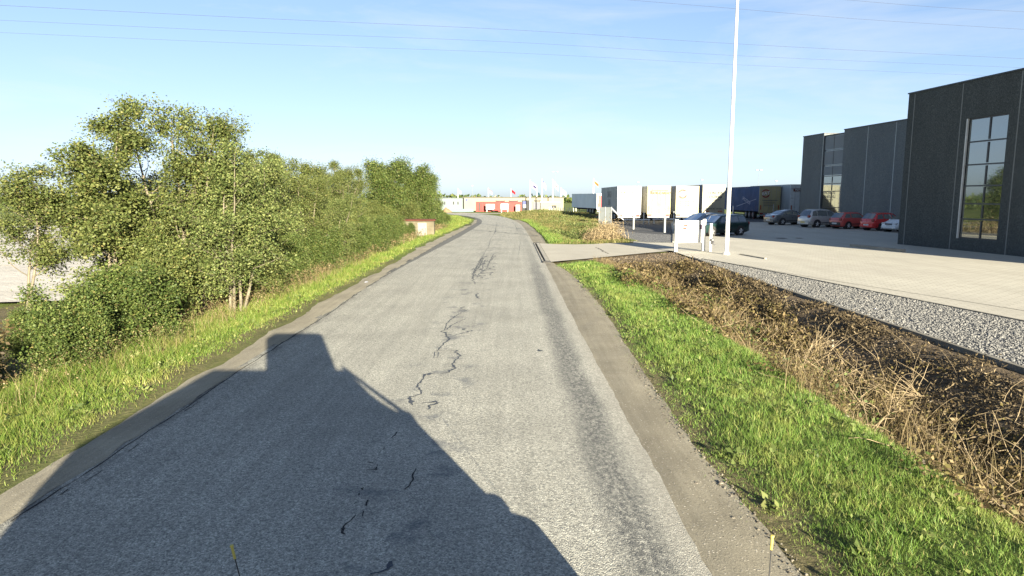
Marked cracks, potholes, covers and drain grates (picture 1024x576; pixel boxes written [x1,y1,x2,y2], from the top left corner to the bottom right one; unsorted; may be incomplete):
crack [370,561,393,574]
crack [341,487,369,535]
crack [408,222,497,409]
